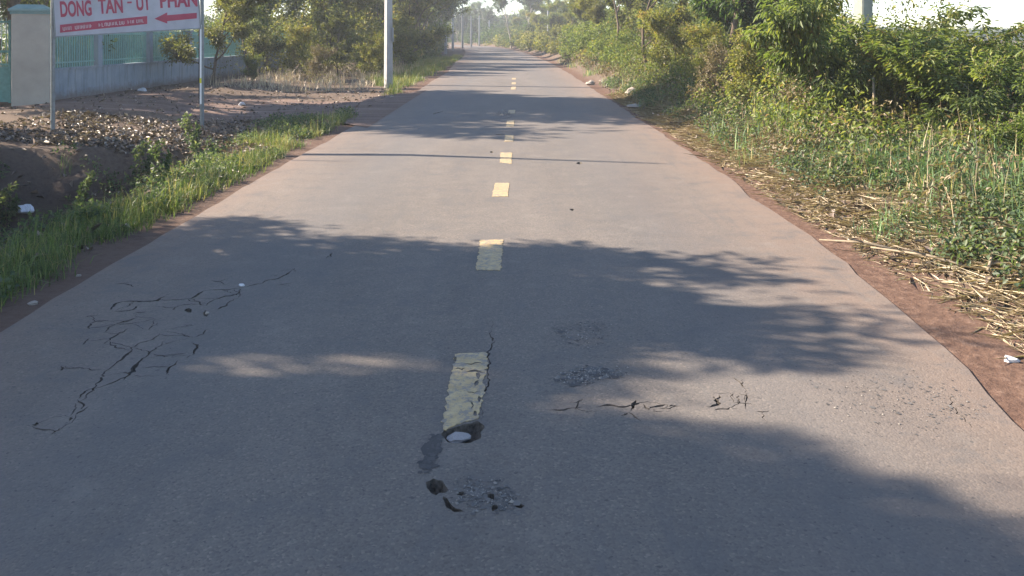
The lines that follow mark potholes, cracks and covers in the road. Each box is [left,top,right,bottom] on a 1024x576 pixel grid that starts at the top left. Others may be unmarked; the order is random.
pothole [441,421,485,443]
crack [481,324,495,421]
pothole [426,478,448,495]
crack [32,269,295,434]
